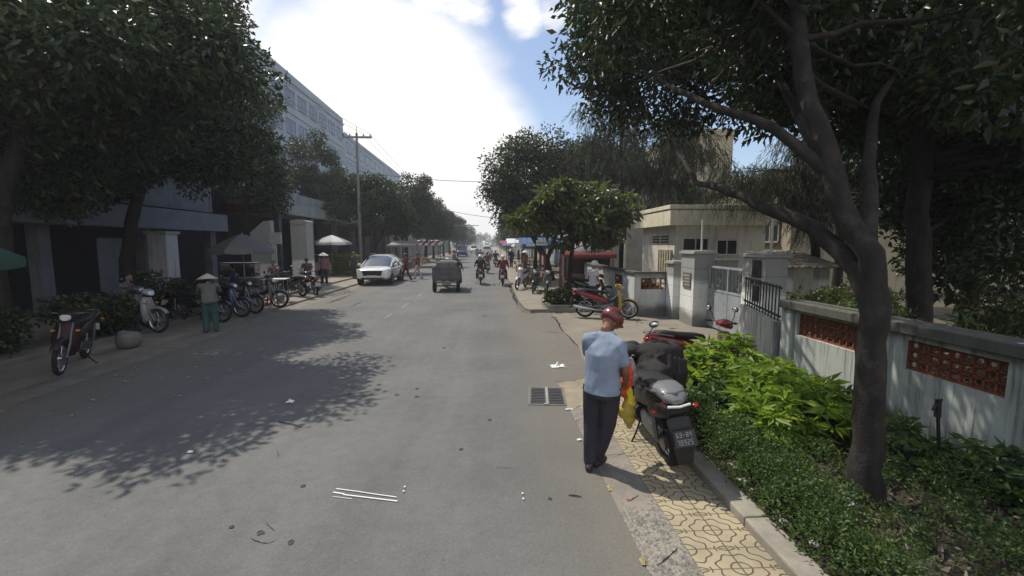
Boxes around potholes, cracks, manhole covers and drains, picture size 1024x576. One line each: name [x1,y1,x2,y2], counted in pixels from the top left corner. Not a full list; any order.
drain grate [528,387,567,406]
